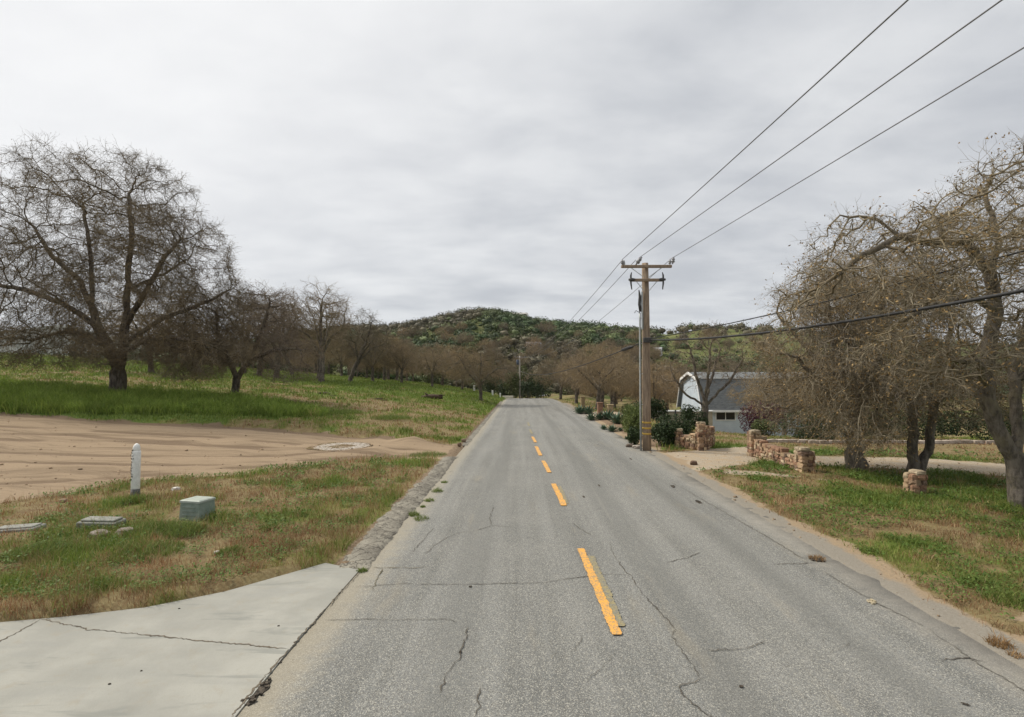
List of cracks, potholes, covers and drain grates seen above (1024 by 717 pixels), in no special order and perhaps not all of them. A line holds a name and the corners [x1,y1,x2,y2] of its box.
crack [232,529,713,717]
